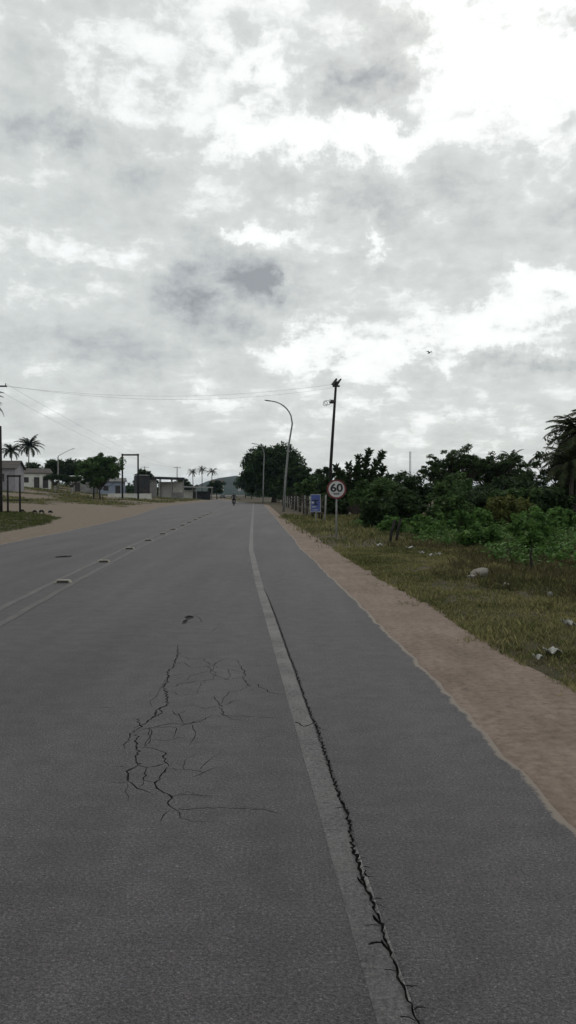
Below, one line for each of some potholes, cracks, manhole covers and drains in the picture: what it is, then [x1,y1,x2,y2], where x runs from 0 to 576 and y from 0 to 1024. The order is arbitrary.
crack [263,587,426,1024]
crack [117,648,284,822]
